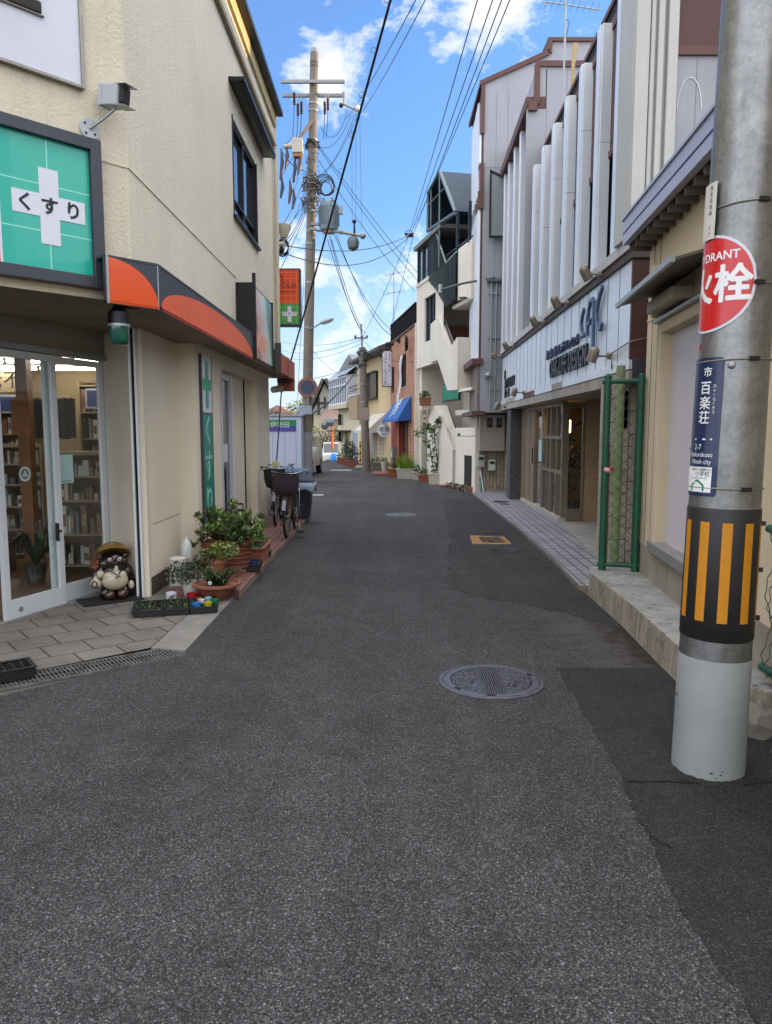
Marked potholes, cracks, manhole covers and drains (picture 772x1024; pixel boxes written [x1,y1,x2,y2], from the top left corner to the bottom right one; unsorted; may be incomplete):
drain grate [0,649,186,692]
manhole cover [439,664,544,700]
crack [647,828,674,849]
